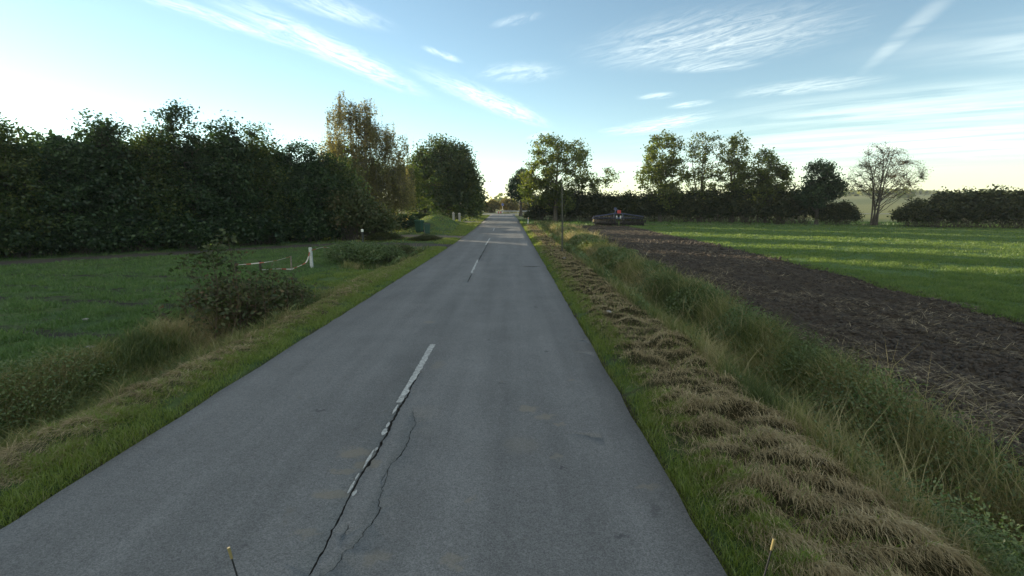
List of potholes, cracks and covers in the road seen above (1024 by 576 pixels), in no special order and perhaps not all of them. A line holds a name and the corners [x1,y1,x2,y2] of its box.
crack [309,373,420,575]
